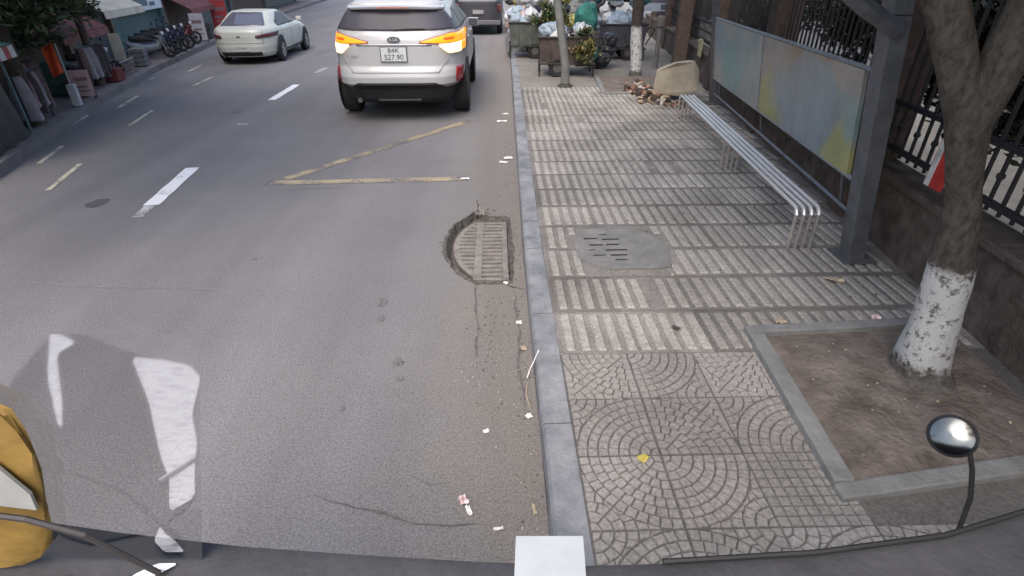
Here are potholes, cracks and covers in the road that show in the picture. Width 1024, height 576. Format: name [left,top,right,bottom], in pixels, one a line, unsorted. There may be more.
crack [312,476,482,526]
manhole cover [574,228,672,270]
drain grate [454,222,509,282]
